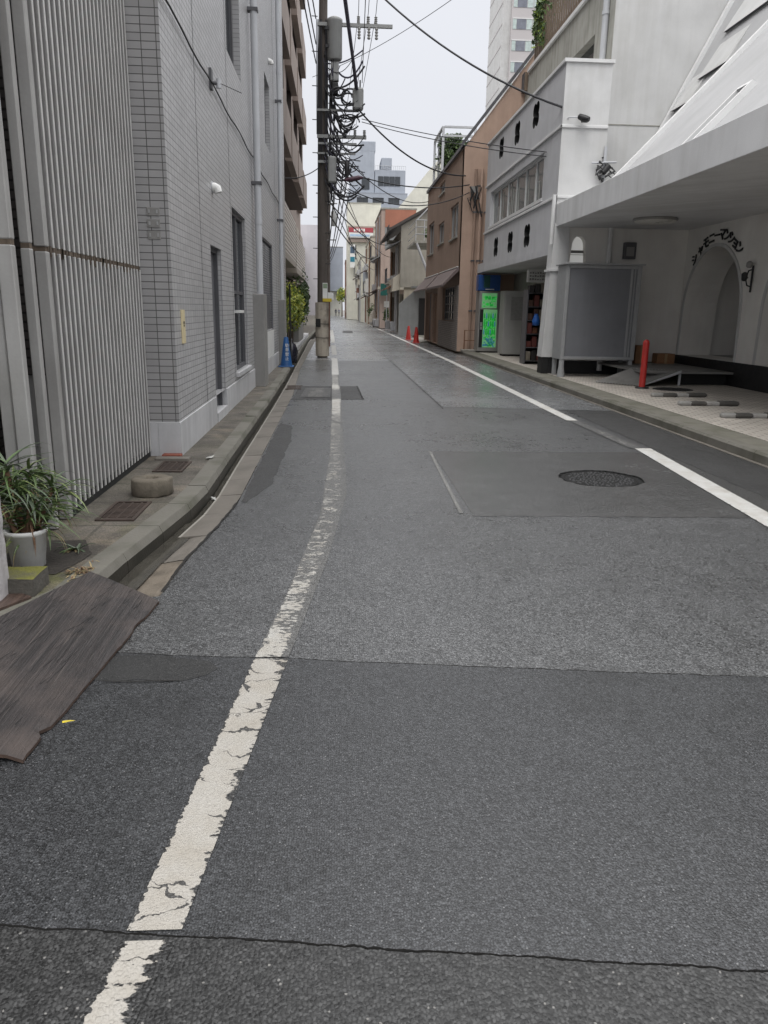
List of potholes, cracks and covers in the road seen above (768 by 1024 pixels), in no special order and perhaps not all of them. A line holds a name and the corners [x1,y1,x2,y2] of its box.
manhole cover [558,470,645,487]
